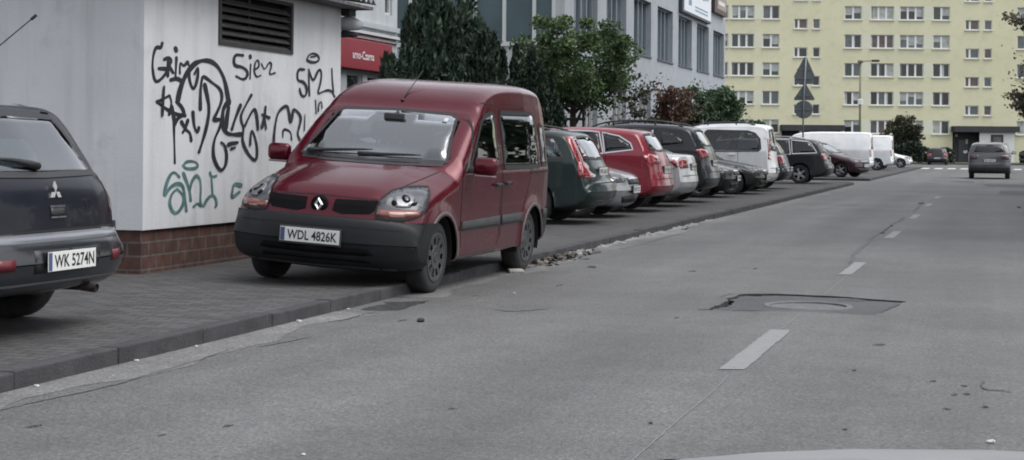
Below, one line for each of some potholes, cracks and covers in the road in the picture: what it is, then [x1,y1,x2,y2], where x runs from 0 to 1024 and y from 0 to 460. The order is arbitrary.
crack [848,204,921,264]
manhole cover [763,301,853,310]
crack [0,347,234,410]
crack [719,293,900,313]
